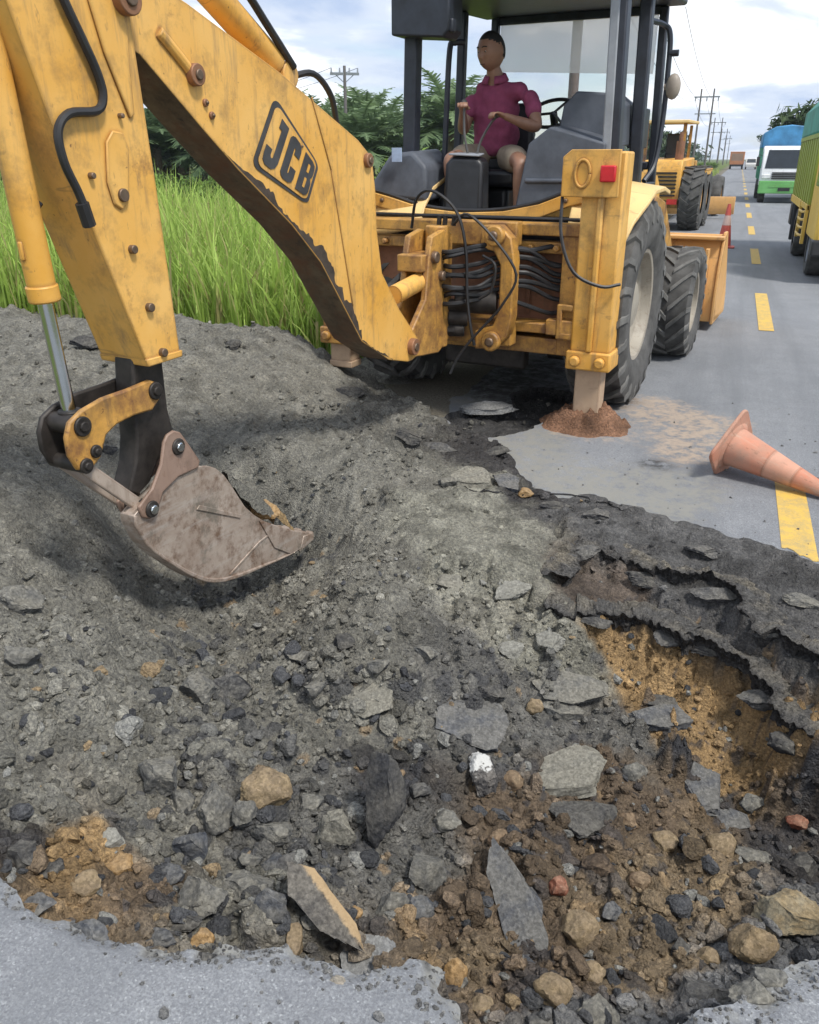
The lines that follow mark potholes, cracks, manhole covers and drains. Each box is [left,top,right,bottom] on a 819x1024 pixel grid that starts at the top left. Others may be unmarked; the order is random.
pothole [120,425,819,1024]
